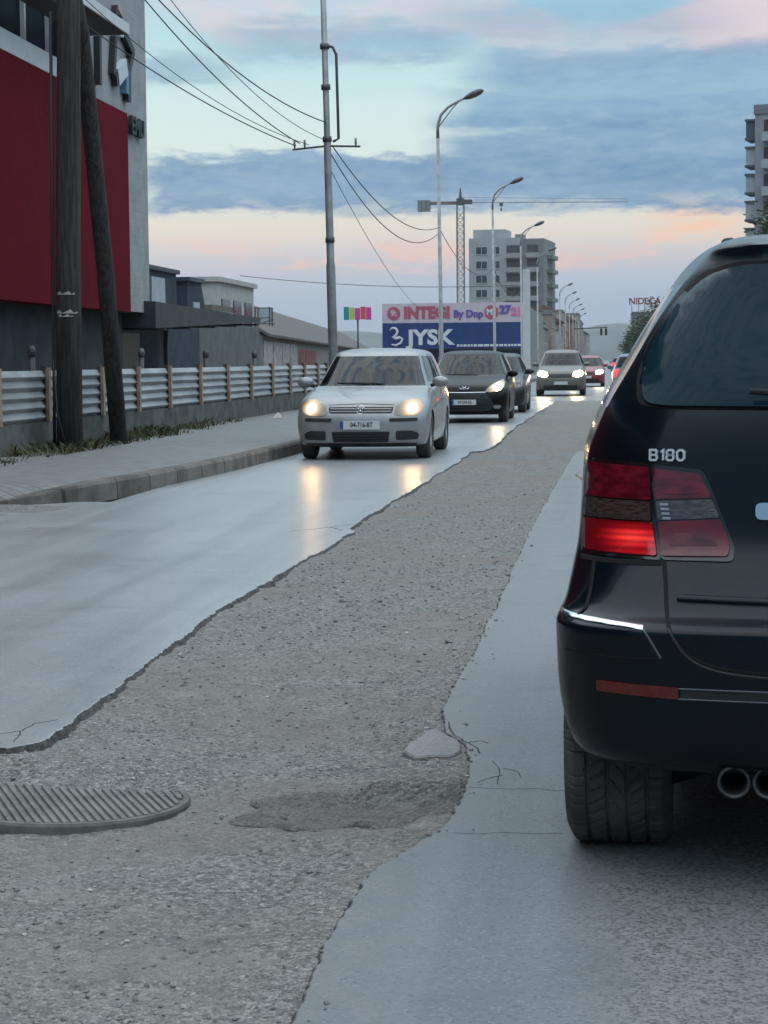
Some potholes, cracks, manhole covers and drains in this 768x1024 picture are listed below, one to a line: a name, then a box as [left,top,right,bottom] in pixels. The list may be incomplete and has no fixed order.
crack [448,722,565,791]
crack [1,719,58,742]
pothole [228,777,466,832]
manhole cover [0,780,191,835]
